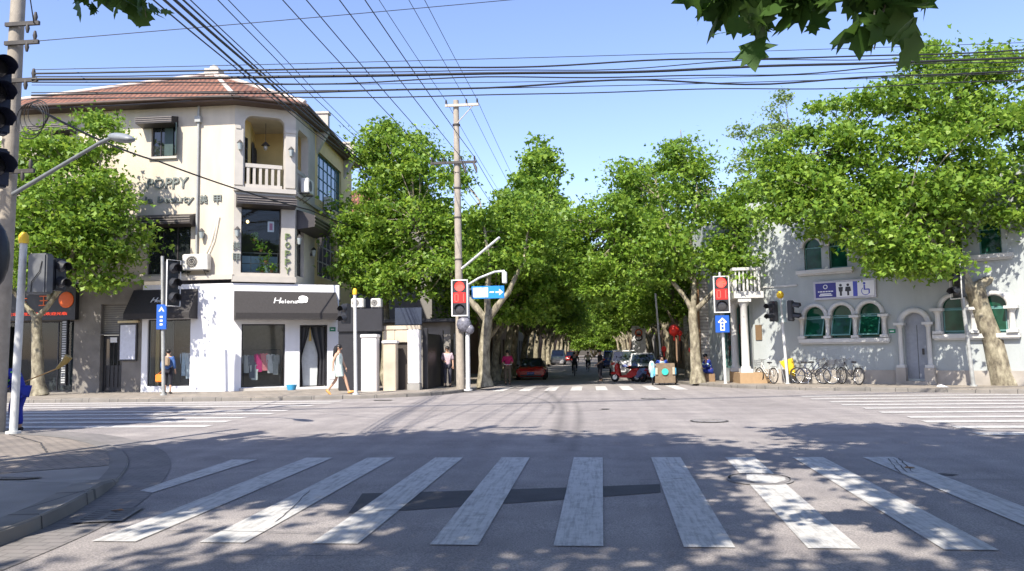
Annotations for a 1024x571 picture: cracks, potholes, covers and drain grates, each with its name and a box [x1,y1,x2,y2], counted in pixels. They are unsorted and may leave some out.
manhole cover [726,473,794,485]
crack [810,458,981,482]
drain grate [70,506,145,523]
